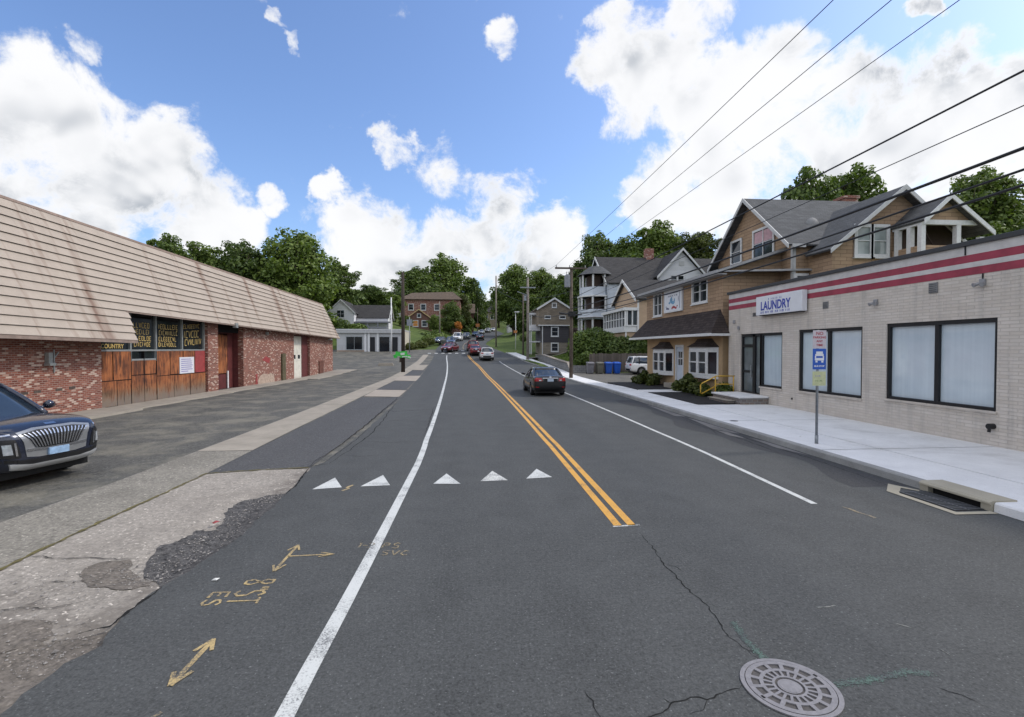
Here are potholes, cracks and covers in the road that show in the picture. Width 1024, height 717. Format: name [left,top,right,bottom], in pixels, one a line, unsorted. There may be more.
pothole [143,493,286,588]
manhole cover [740,658,845,717]
crack [648,685,742,717]
crack [643,537,765,658]
drain grate [887,480,1017,514]
